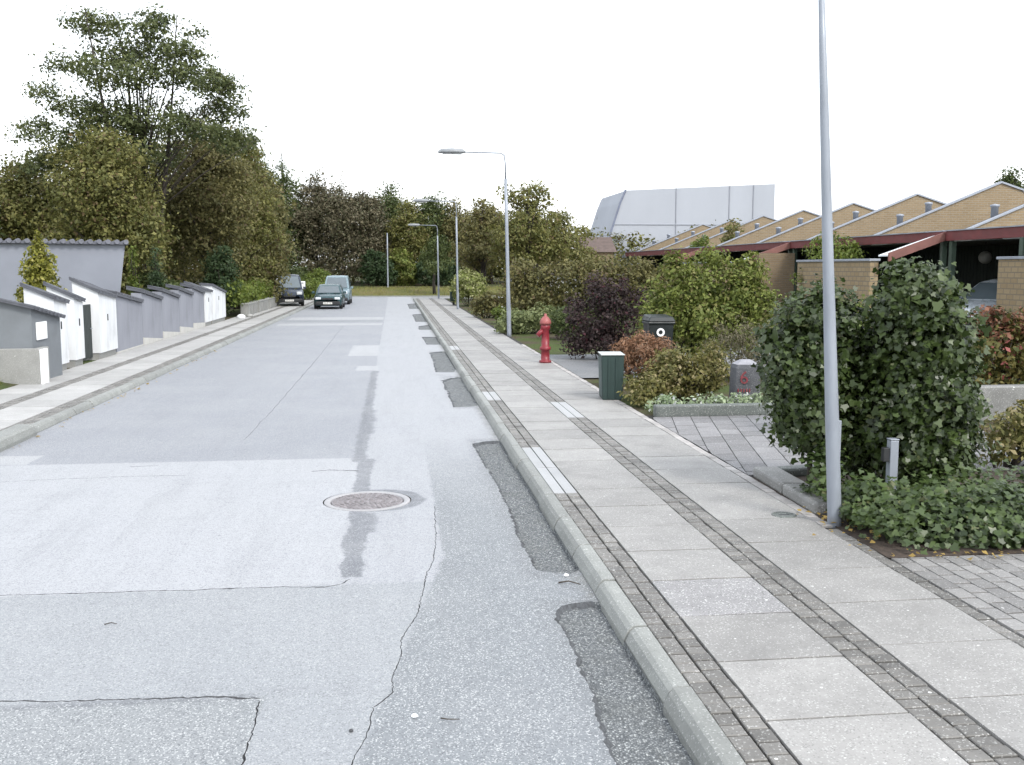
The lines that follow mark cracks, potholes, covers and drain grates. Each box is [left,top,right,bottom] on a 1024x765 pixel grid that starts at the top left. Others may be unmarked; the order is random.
crack [351,507,437,765]
manhole cover [324,491,410,511]
